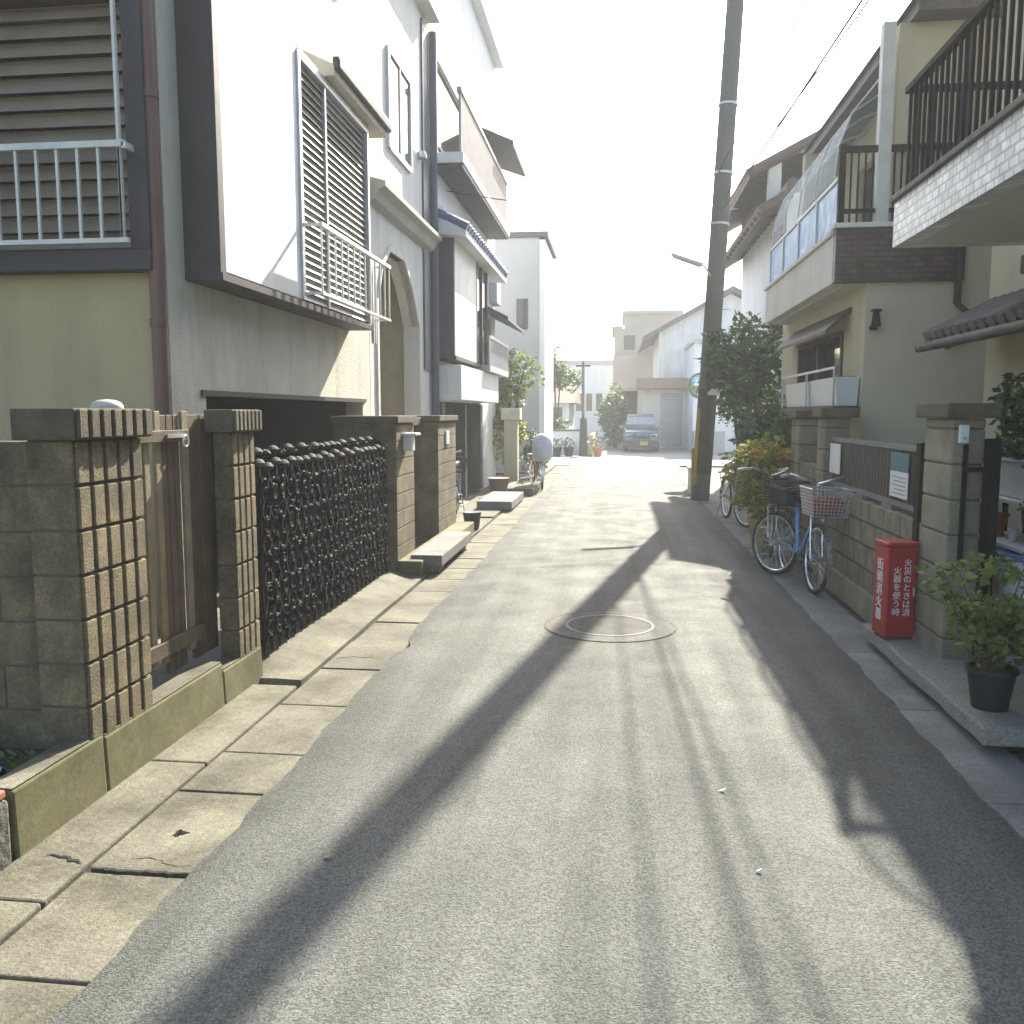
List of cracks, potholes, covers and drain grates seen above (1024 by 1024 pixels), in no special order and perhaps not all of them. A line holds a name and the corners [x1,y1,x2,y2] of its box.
pothole [166,828,194,839]
crack [135,855,192,865]
manhole cover [544,610,676,642]
